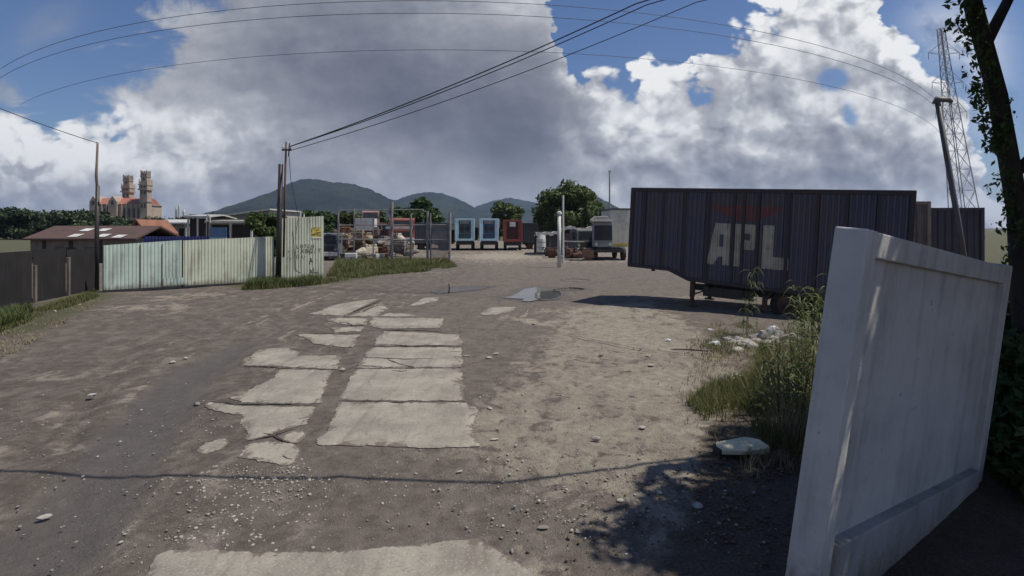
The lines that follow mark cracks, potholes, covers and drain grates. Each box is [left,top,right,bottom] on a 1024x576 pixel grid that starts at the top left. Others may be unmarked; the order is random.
crack [355,344,461,371]
crack [250,426,303,459]
